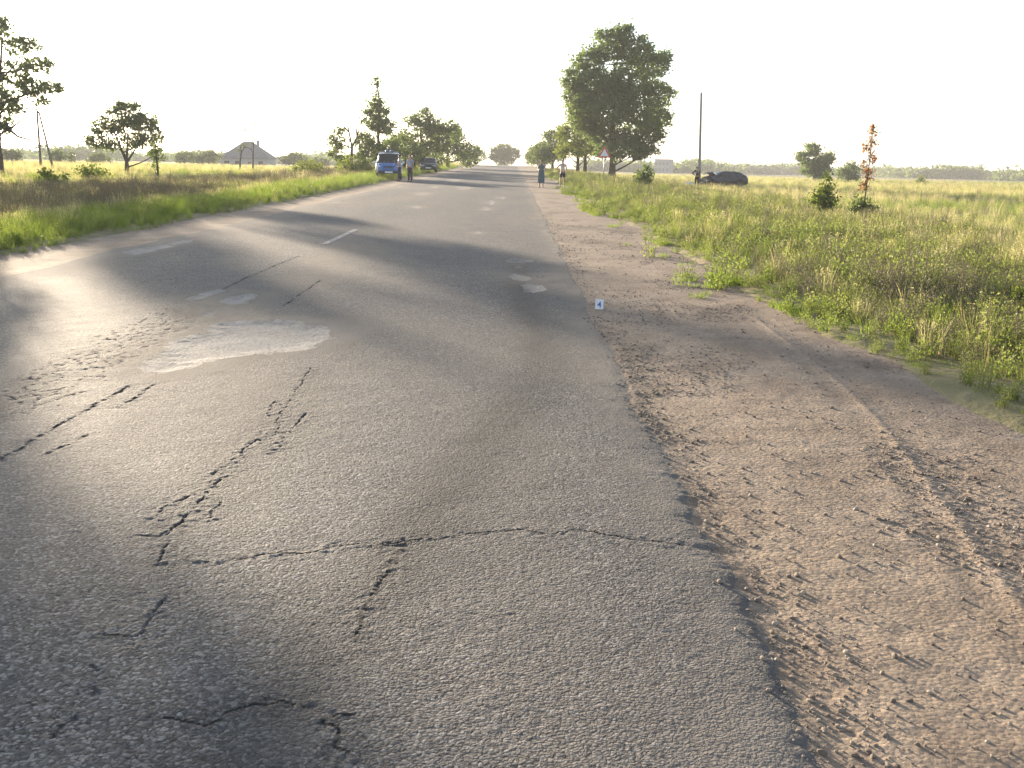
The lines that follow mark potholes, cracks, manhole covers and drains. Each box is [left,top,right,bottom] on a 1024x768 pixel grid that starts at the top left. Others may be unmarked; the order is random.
crack [0,384,154,460]
crack [107,369,689,642]
crack [162,699,357,757]
